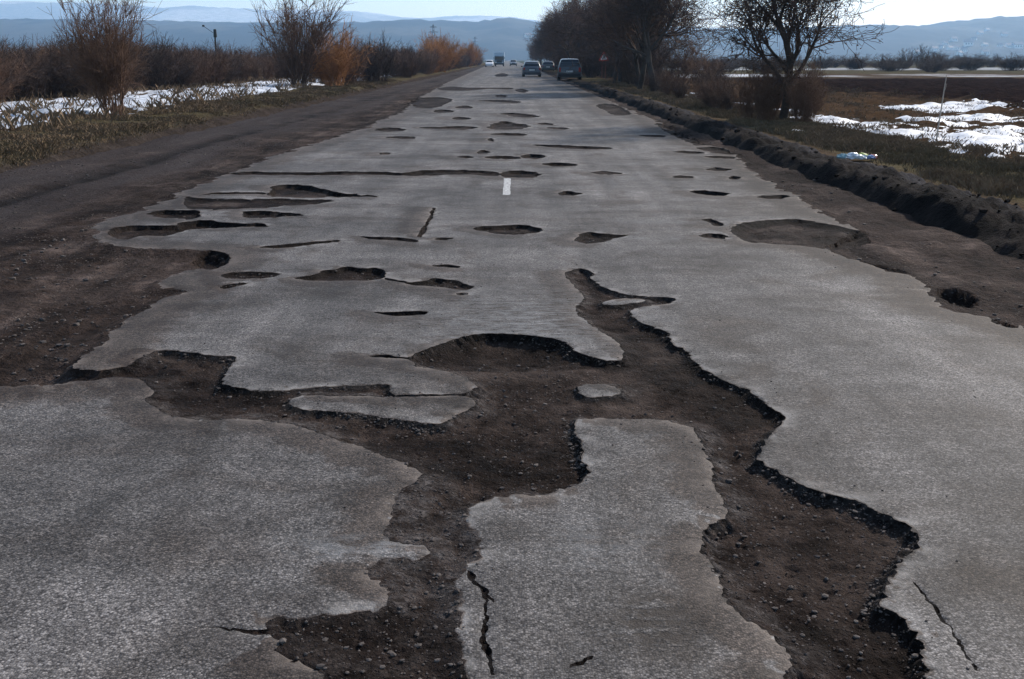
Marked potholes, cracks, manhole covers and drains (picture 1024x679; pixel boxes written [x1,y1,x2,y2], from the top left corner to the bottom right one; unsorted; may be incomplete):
pothole [183,197,332,210]
crack [913,582,978,671]
pothole [108,220,268,240]
crack [361,208,453,242]
